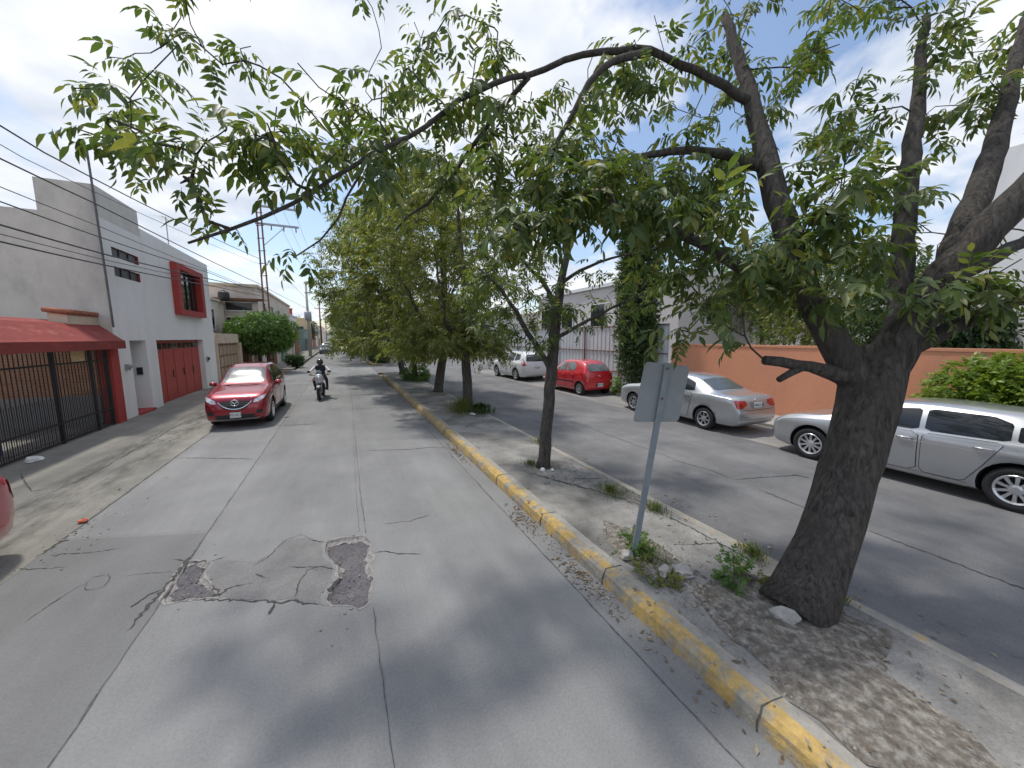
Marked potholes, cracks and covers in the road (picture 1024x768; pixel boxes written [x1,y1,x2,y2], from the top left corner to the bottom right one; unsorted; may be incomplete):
crack [877,533,1024,589]
pothole [158,559,221,605]
crack [128,550,223,630]
pothole [324,535,376,610]
crack [19,539,118,570]
